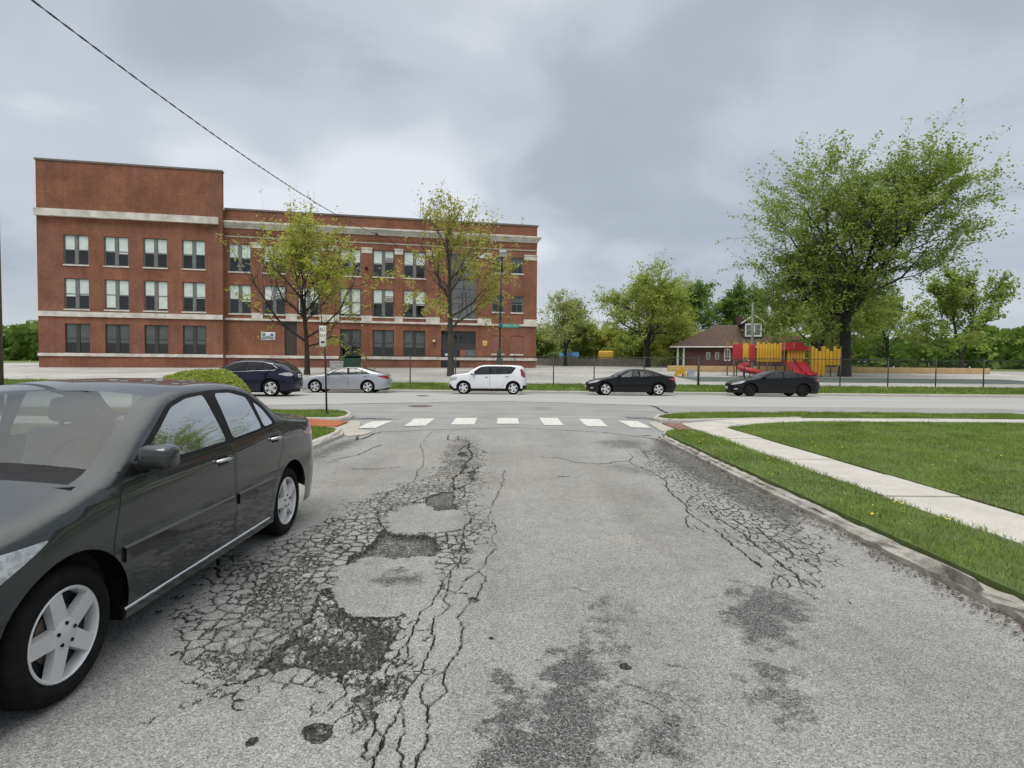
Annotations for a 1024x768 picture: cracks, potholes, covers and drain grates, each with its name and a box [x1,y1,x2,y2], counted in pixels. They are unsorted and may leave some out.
pothole [253,588,406,679]
crack [143,433,505,768]
pothole [301,723,334,744]
pothole [345,529,442,565]
pothole [424,491,457,511]
crack [552,449,852,604]
